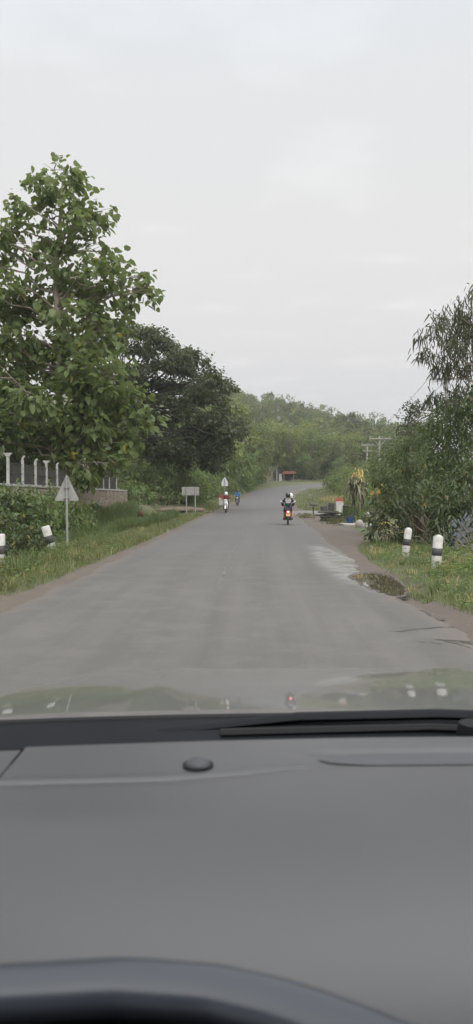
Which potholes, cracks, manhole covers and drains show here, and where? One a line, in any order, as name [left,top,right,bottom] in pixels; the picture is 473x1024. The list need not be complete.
crack [406,598,473,648]
pothole [348,571,408,598]
